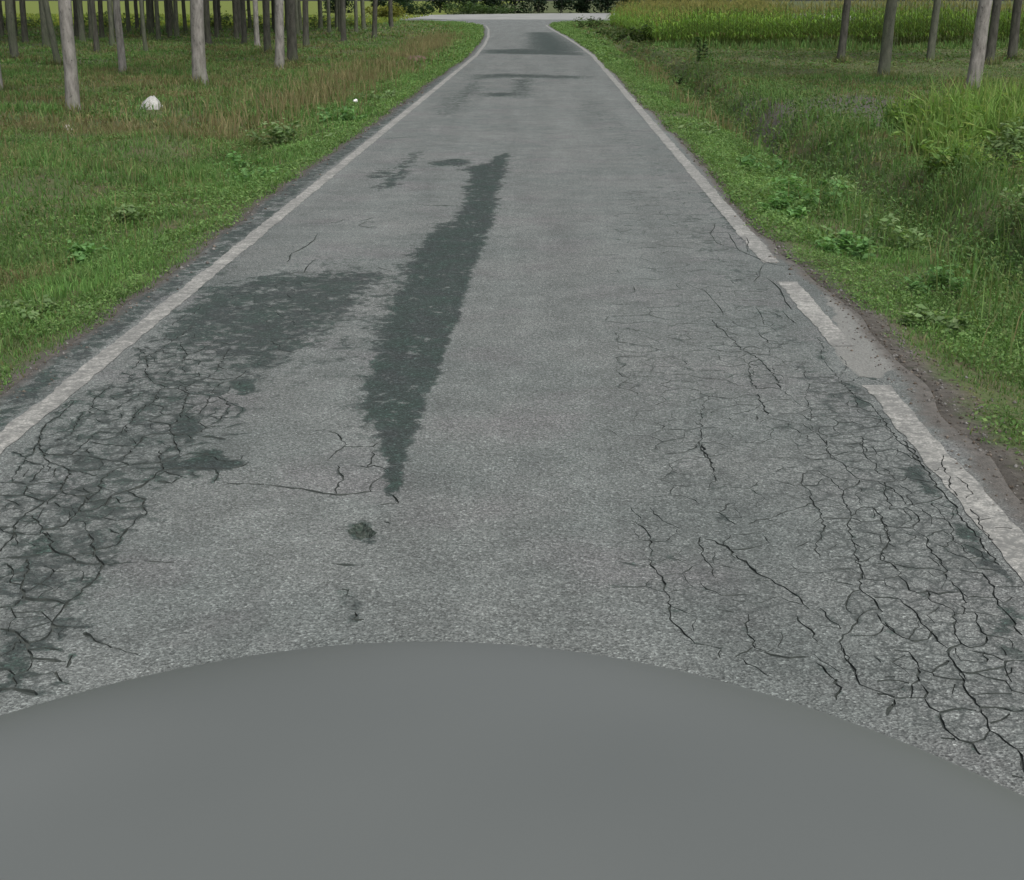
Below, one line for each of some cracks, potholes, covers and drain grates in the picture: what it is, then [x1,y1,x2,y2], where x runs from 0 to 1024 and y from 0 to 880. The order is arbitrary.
crack [0,279,399,695]
crack [602,191,1024,778]
